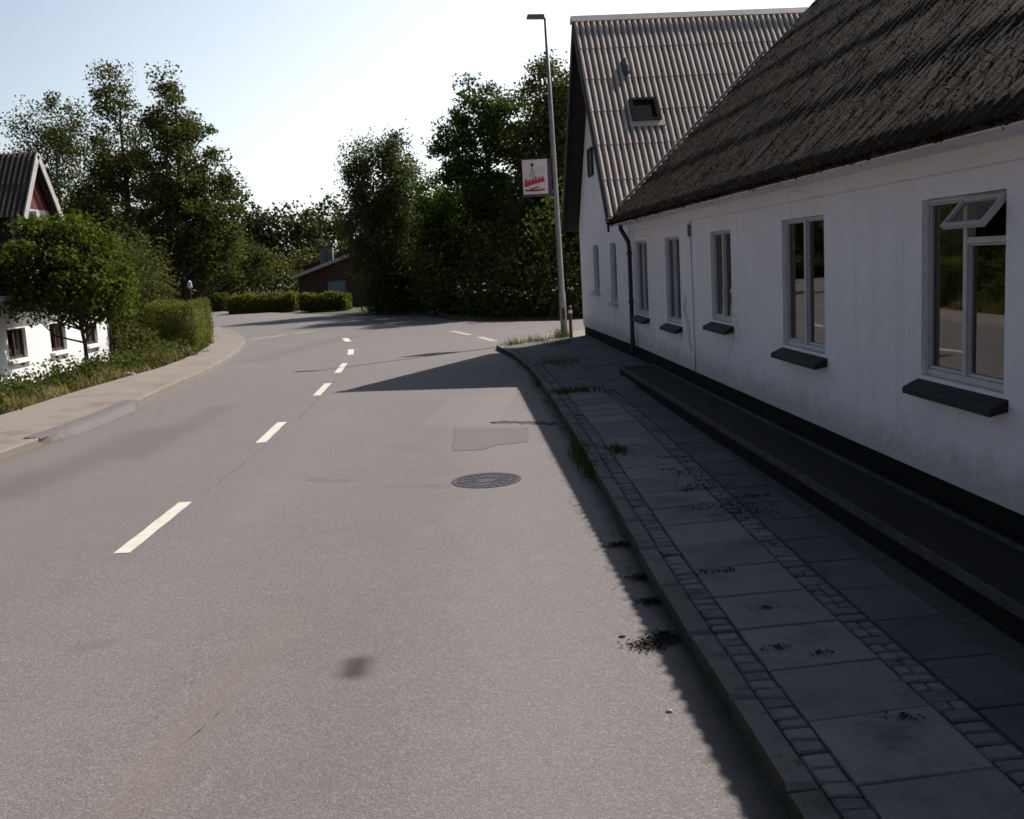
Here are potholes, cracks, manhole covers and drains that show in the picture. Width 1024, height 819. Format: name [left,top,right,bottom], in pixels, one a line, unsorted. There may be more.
manhole cover [452,472,521,488]
